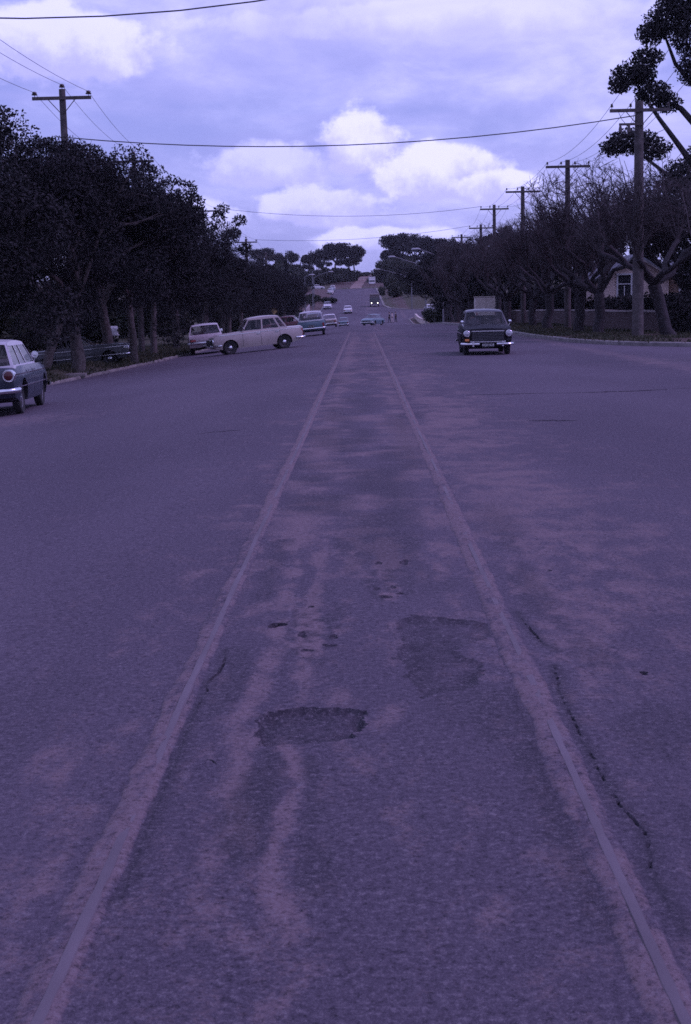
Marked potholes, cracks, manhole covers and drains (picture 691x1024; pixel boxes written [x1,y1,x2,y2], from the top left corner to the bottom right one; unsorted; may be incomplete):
pothole [253,707,369,747]
crack [517,612,554,649]
crack [553,666,687,931]
crack [119,650,226,902]
